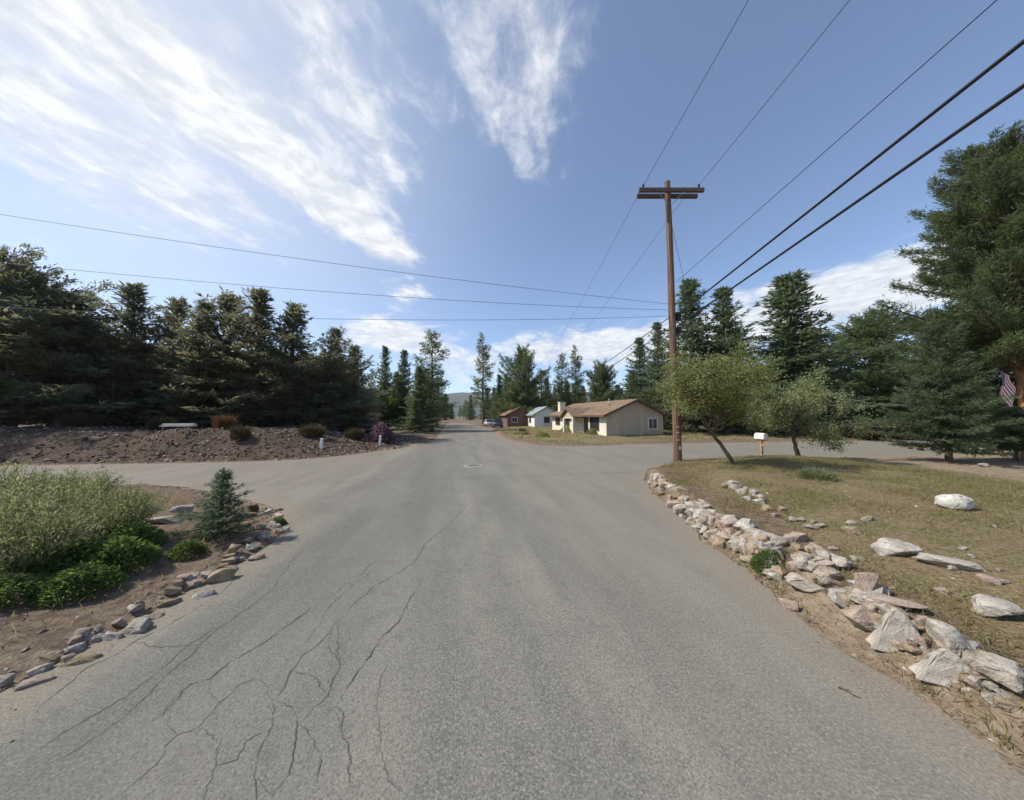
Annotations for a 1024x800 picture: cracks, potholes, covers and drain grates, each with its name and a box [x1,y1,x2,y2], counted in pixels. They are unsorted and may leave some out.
crack [34,508,465,800]
